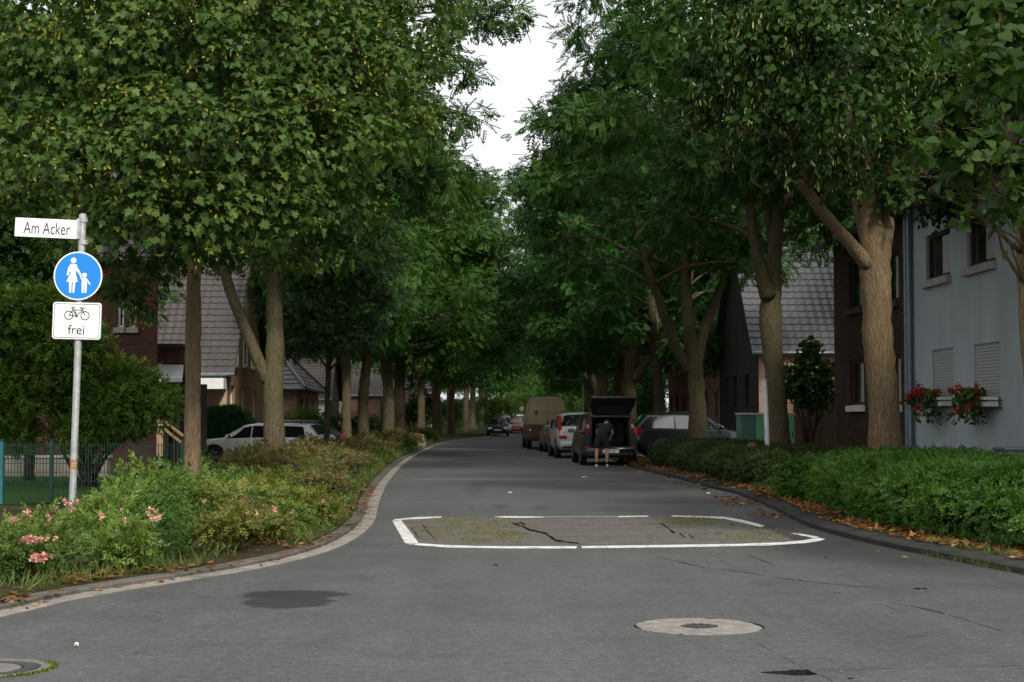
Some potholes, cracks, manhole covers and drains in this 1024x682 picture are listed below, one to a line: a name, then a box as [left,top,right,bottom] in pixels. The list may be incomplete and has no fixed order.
manhole cover [0,659,51,678]
crack [512,522,579,544]
manhole cover [634,618,765,635]
crack [657,554,867,587]
crack [881,602,1001,631]
